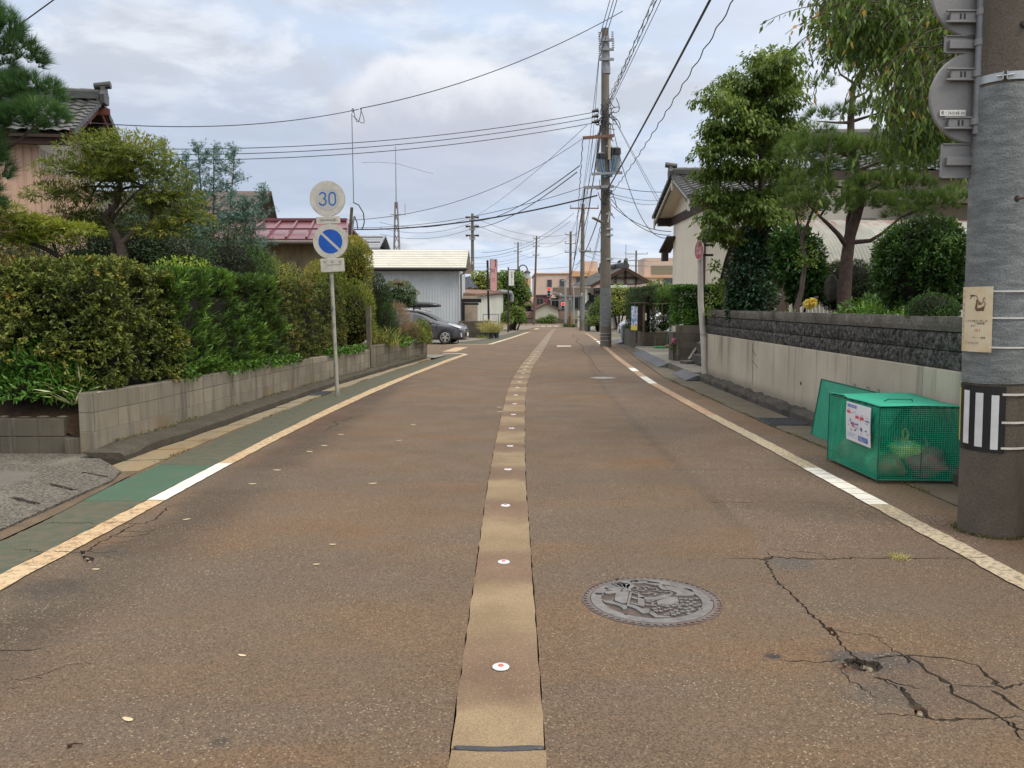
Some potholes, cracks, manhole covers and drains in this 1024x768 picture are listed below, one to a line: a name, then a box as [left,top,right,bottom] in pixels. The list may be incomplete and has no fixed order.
drain grate [755,418,808,427]
crack [30,506,172,560]
pothole [845,658,883,672]
manhole cover [582,577,722,627]
crack [727,550,1024,741]
